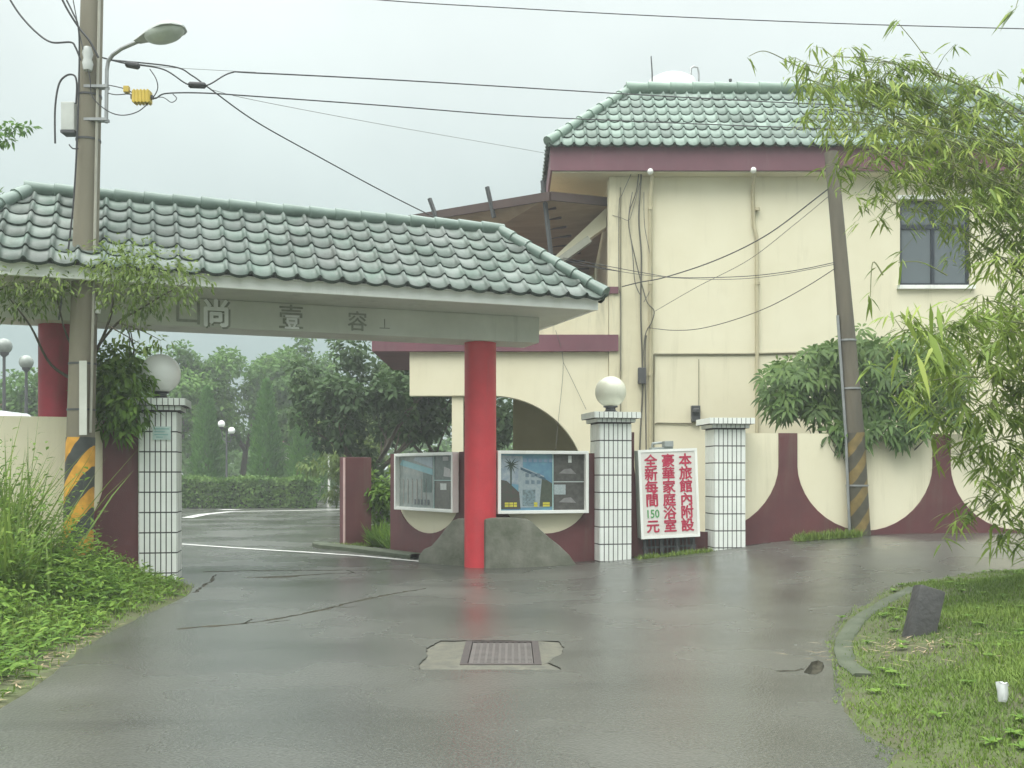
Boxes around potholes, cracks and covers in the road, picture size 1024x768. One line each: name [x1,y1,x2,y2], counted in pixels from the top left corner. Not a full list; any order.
pothole [804,661,824,674]
crack [177,588,426,630]
crack [192,569,416,593]
